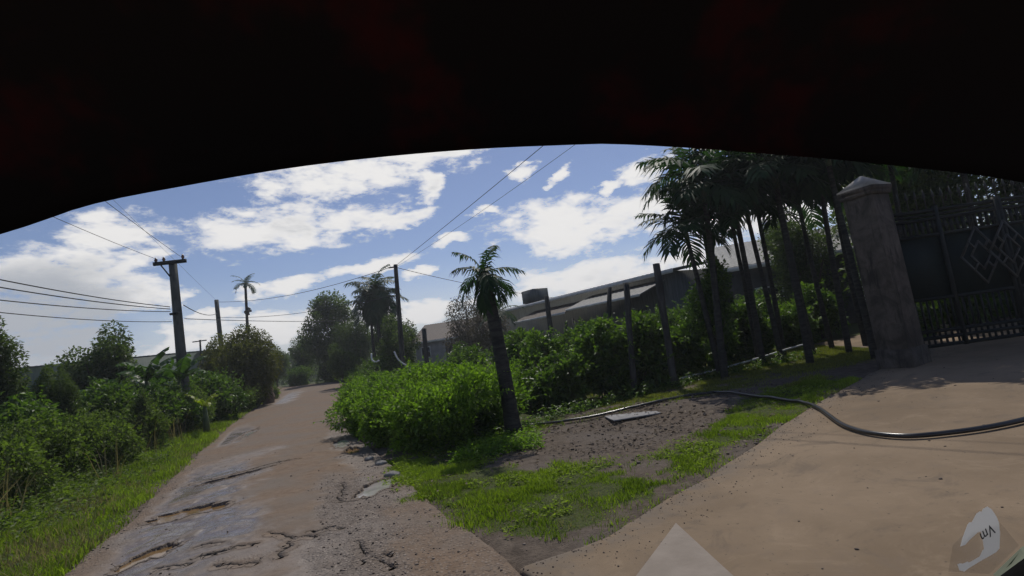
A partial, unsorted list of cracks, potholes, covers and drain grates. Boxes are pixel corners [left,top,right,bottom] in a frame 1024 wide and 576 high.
pothole [347,476,404,502]
pothole [136,499,236,526]
pothole [103,538,190,576]
crack [148,524,399,573]
crack [330,482,350,503]
